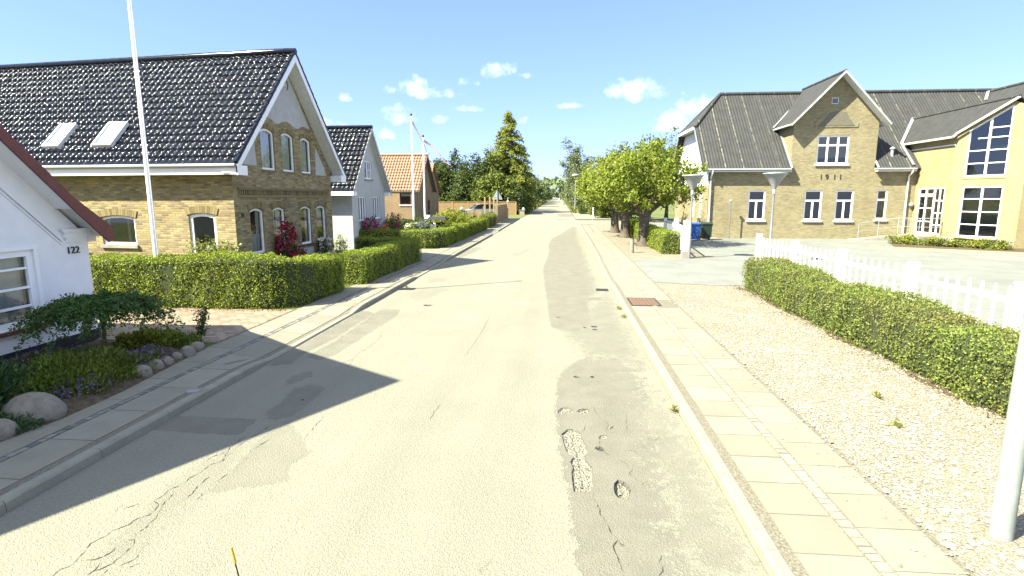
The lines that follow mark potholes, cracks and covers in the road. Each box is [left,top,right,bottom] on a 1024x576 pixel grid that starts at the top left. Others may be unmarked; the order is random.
pothole [561,429,593,492]
pothole [614,479,631,499]
manhole cover [627,298,662,306]
crack [593,493,624,572]
crack [58,426,269,575]
